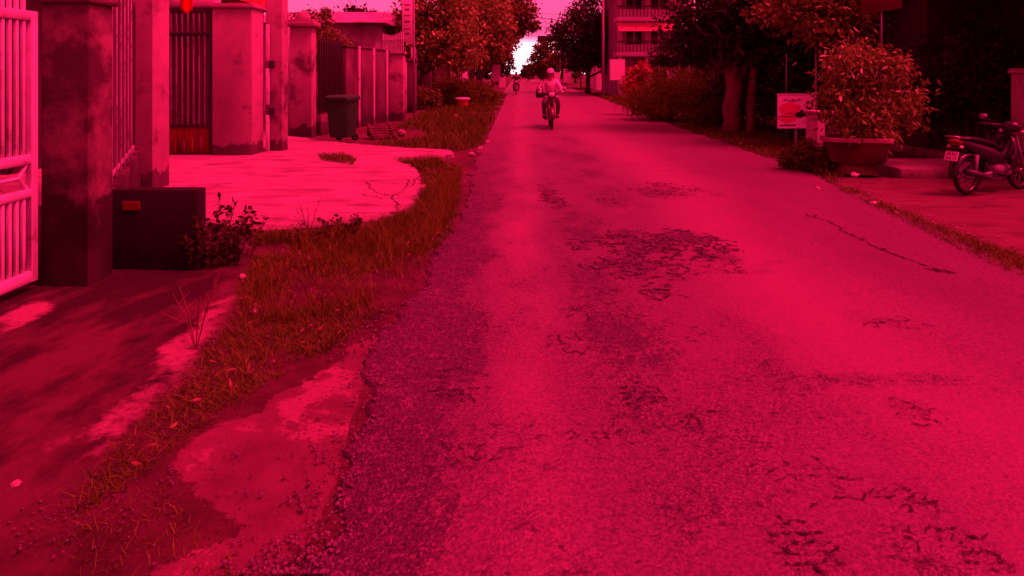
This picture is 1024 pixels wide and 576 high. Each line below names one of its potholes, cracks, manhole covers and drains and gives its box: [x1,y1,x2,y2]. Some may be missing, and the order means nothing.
crack [886,400,942,426]
crack [363,177,418,207]
crack [746,454,1016,576]
crack [806,213,957,274]
crack [864,317,934,329]
